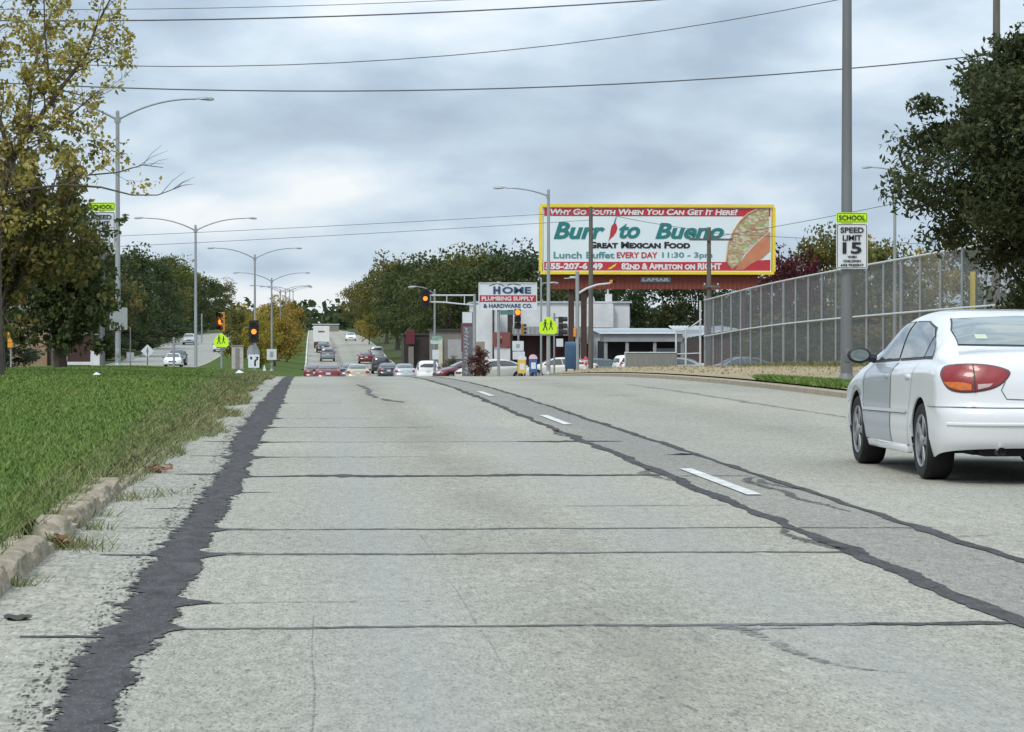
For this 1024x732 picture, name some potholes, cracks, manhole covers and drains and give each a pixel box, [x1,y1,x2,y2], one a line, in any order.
crack [202,600,425,730]
crack [100,527,913,661]
